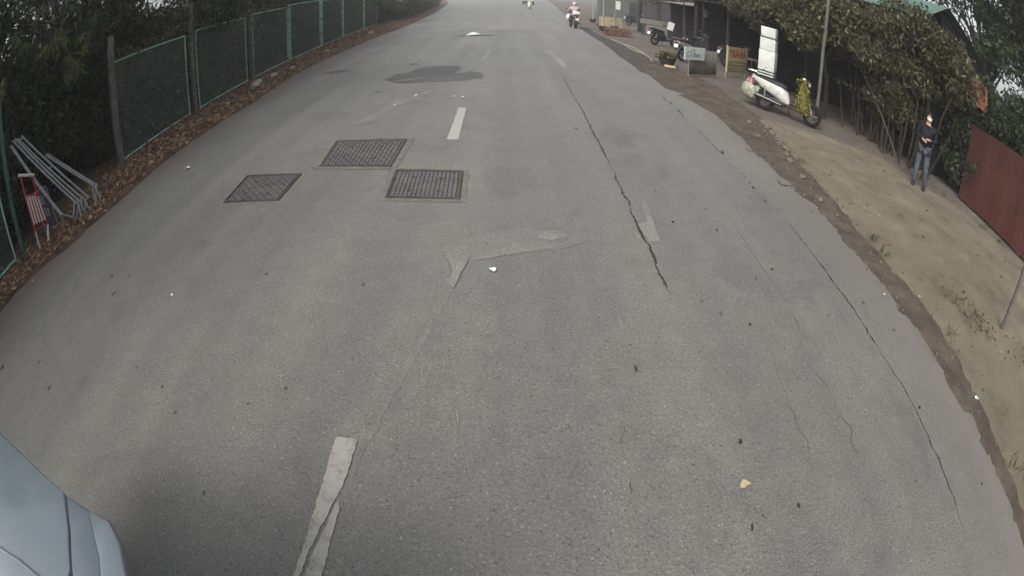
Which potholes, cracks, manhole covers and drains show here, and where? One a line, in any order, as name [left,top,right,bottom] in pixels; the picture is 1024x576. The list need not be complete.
manhole cover [217,172,308,206]
crack [725,212,862,460]
manhole cover [313,138,414,170]
manhole cover [378,168,470,202]
